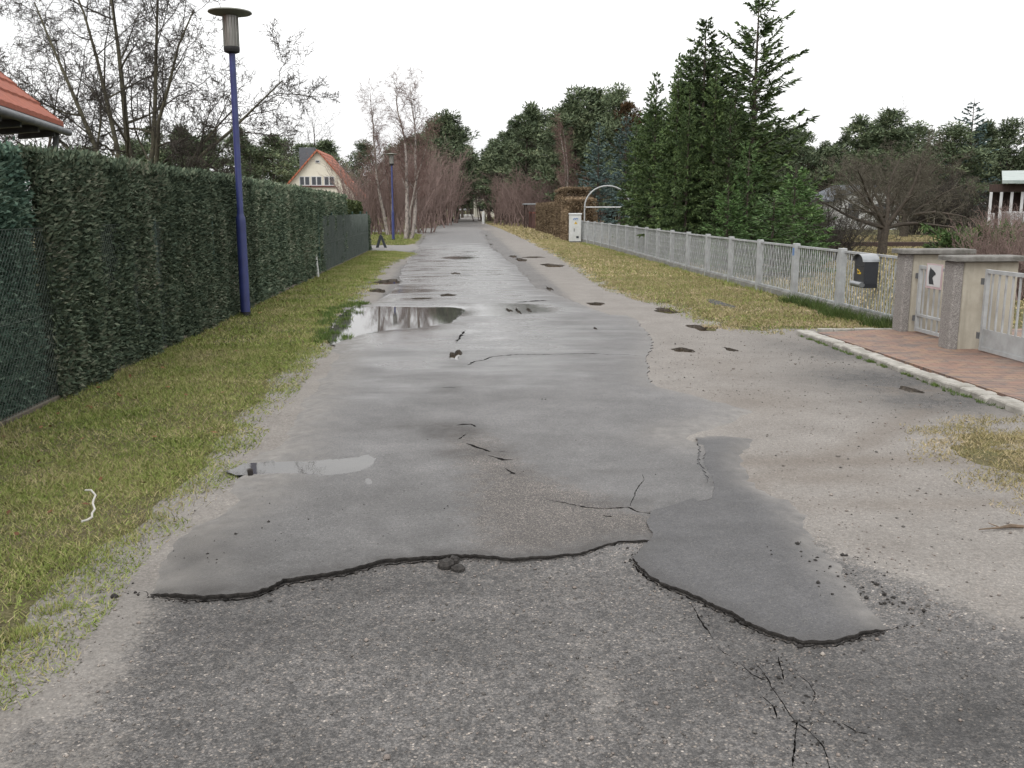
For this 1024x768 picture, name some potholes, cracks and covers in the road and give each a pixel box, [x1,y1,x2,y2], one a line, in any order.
crack [443,331,636,388]
crack [630,560,908,768]
crack [459,424,515,474]
crack [555,475,650,517]
